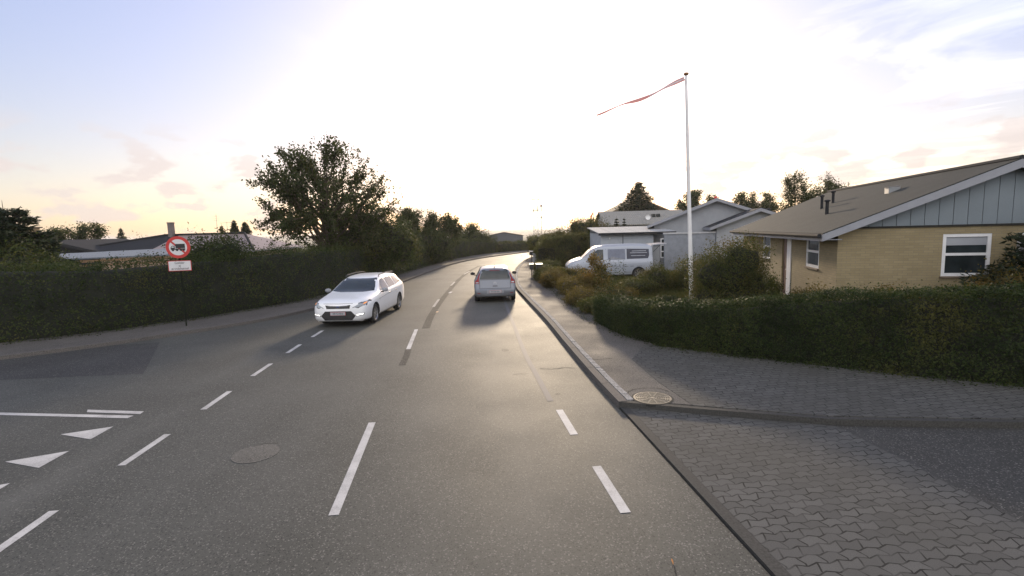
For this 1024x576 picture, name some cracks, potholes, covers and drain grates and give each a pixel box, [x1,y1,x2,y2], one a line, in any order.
manhole cover [231,444,280,464]
manhole cover [632,391,674,407]
